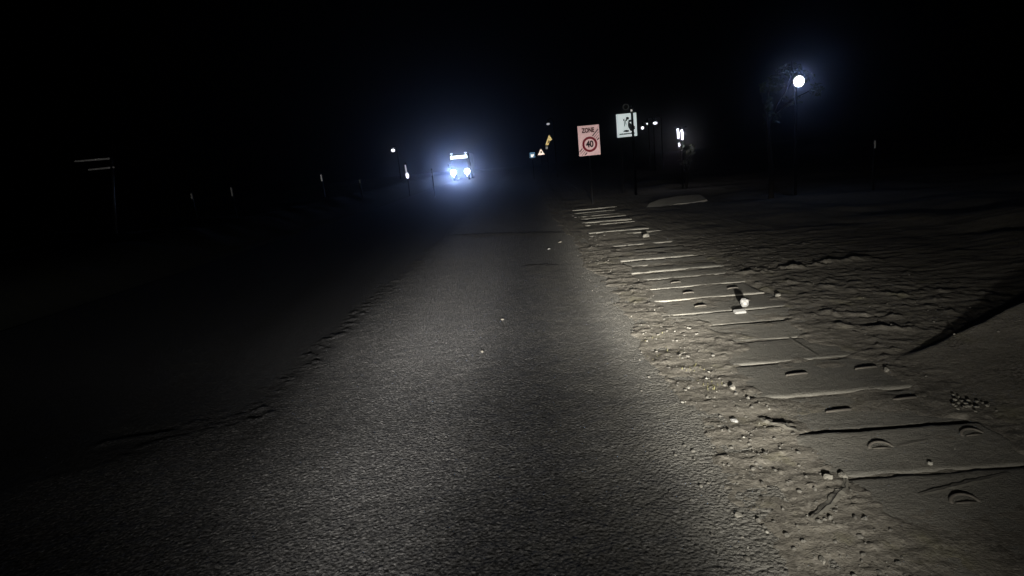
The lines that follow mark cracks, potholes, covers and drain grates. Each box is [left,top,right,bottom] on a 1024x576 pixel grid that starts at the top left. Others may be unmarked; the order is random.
crack [918,472,1010,496]
crack [810,478,849,518]
